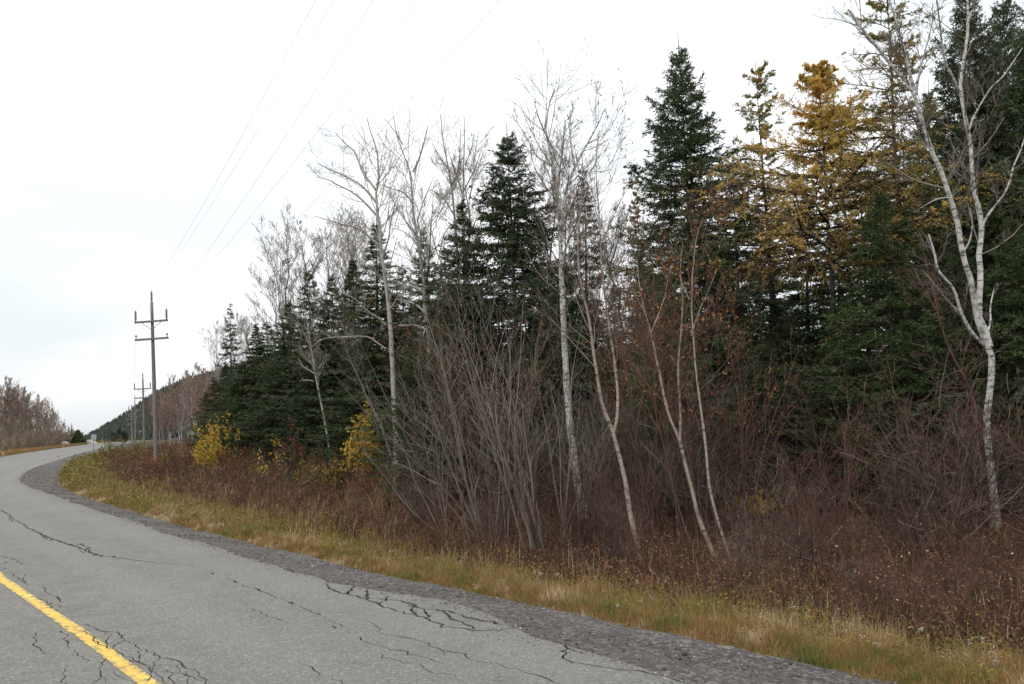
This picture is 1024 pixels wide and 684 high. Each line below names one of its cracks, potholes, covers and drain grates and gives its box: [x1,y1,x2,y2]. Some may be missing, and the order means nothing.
crack [32,624,208,684]
crack [0,510,180,565]
crack [211,573,688,684]
